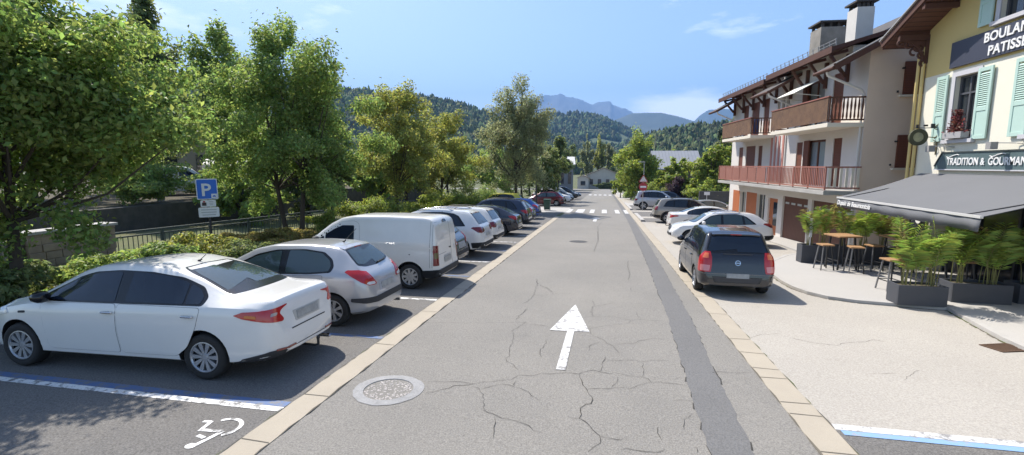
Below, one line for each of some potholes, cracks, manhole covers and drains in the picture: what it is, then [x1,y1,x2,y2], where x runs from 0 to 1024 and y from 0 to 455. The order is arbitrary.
manhole cover [353,375,425,406]
crack [427,305,692,451]
drain grate [979,343,1024,353]
